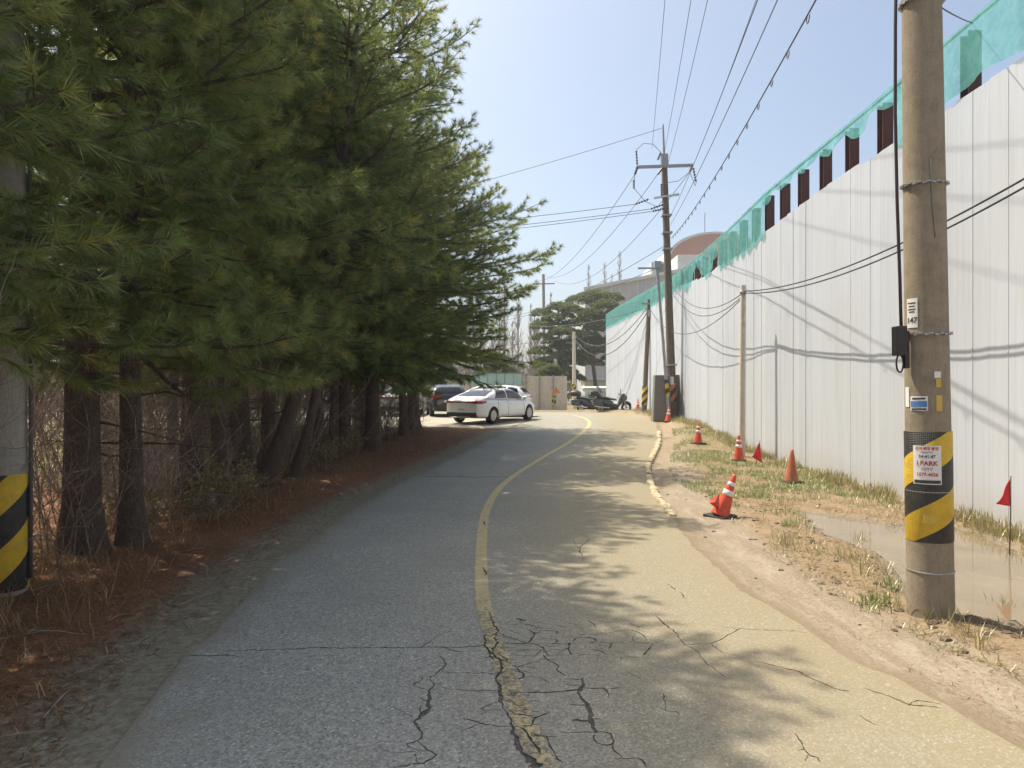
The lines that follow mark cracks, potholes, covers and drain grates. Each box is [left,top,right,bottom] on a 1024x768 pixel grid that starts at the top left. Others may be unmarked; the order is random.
crack [795,733,820,762]
crack [190,612,806,768]
crack [865,688,939,708]
crack [754,660,846,691]
